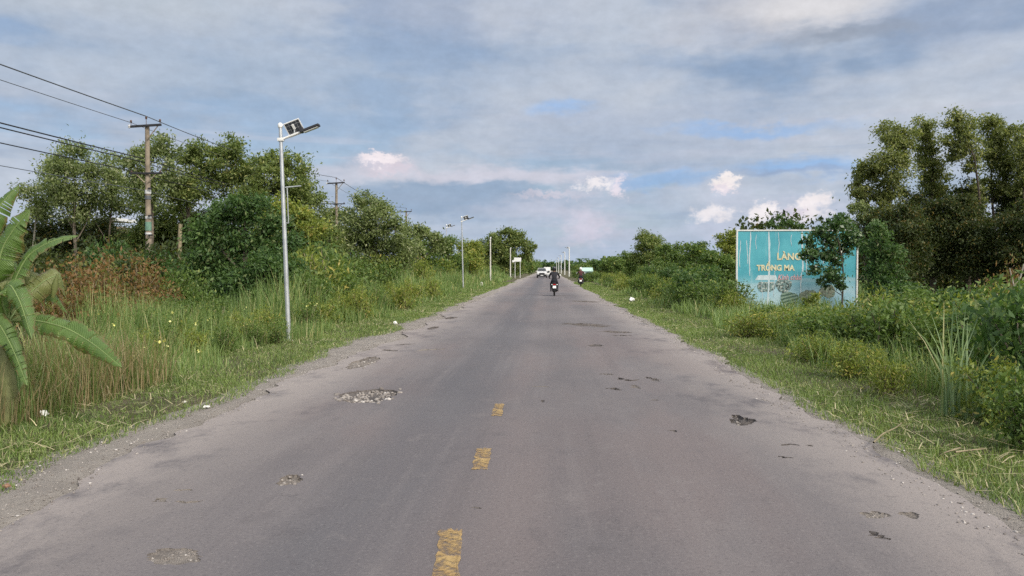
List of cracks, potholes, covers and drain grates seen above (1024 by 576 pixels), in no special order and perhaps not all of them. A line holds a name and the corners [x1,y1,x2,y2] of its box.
pothole [334,387,402,404]
pothole [276,474,303,486]
pothole [147,548,203,565]
pothole [342,356,381,369]
pothole [730,415,756,426]
pothole [860,511,891,519]
